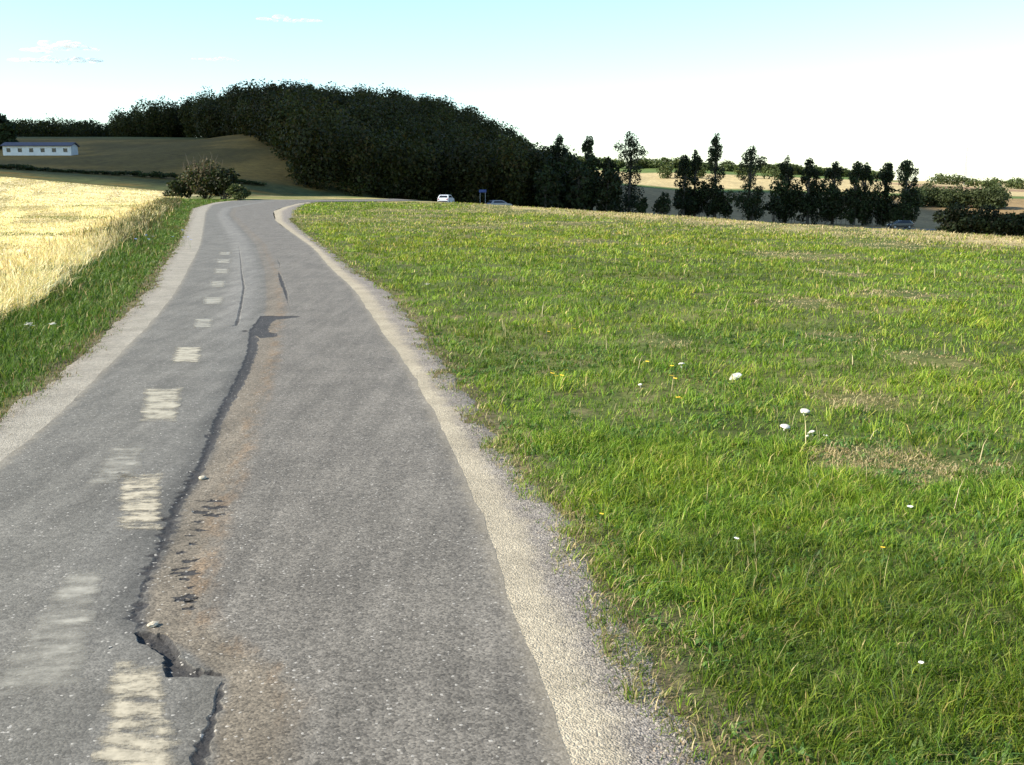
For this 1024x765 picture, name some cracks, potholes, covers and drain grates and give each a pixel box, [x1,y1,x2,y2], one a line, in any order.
pothole [134,631,223,678]
crack [225,246,246,326]
crack [277,259,291,311]
